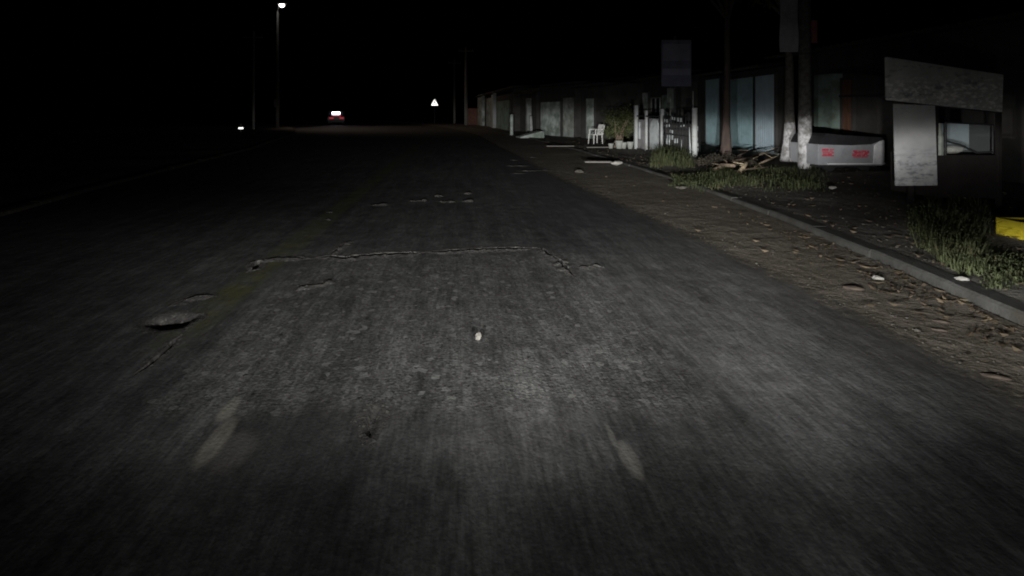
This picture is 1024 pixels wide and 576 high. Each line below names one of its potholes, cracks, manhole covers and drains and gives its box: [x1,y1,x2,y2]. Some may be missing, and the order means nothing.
crack [244,241,603,291]
pothole [132,310,208,335]
crack [132,334,183,377]
